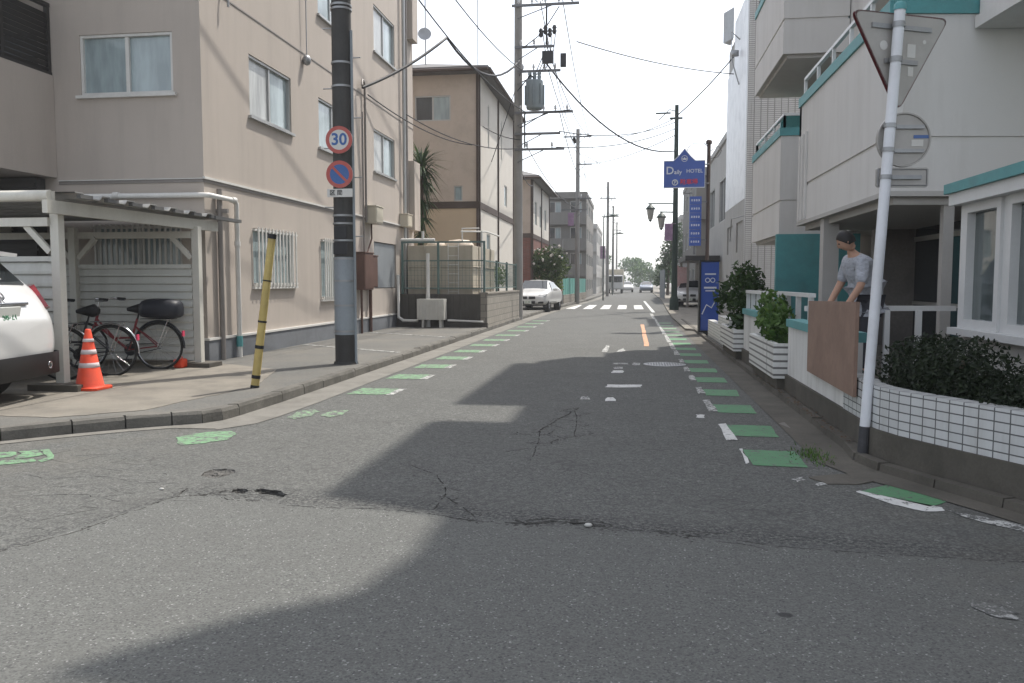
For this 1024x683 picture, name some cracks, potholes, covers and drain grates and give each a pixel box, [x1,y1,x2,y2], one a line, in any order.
crack [279,465,1024,564]
crack [0,448,299,552]
crack [505,407,593,460]
pothole [201,469,236,478]
pothole [254,488,288,497]
